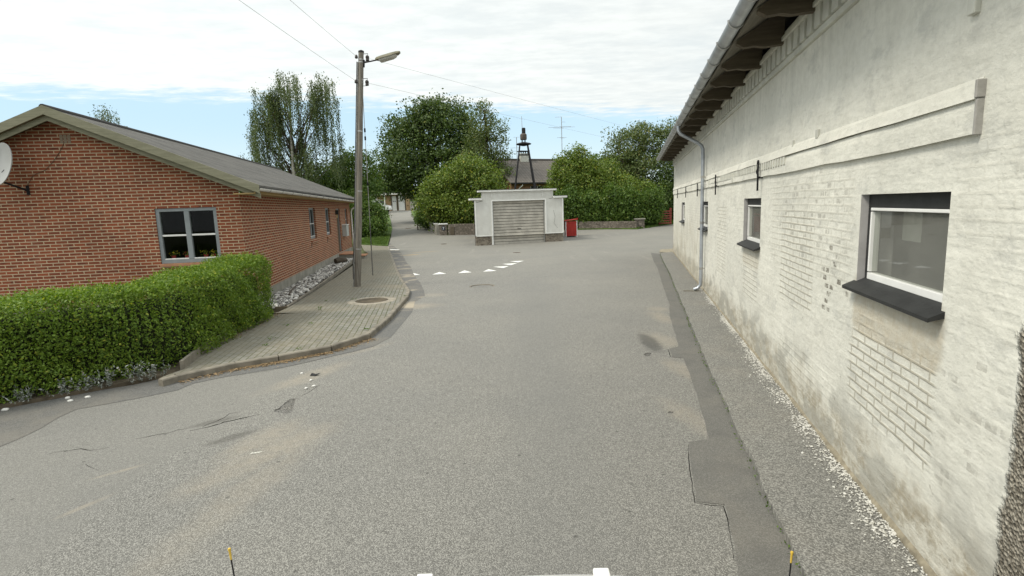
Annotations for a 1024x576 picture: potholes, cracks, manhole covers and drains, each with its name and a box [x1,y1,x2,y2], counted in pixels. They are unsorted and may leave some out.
manhole cover [347,296,396,305]
pothole [274,398,297,414]
